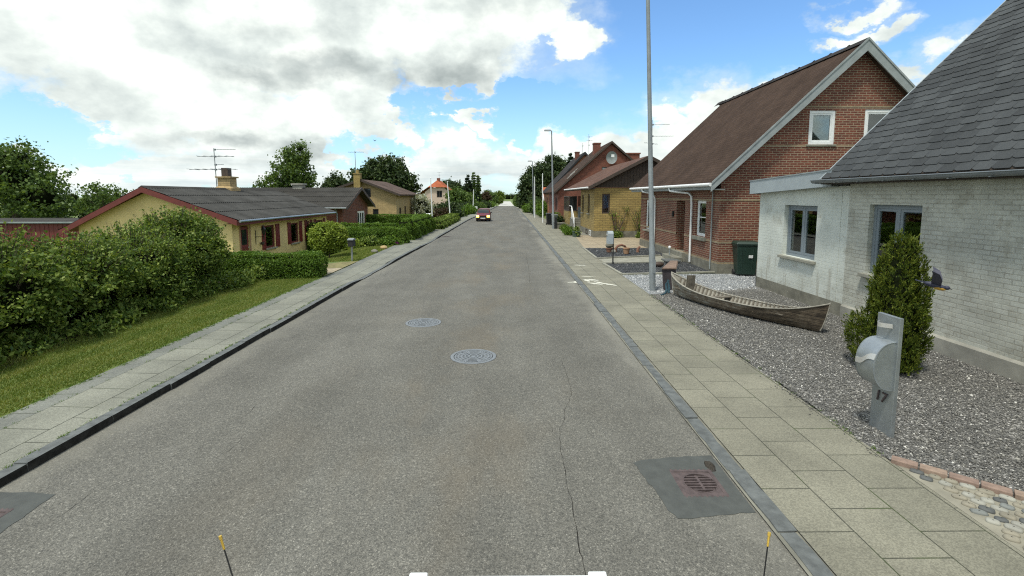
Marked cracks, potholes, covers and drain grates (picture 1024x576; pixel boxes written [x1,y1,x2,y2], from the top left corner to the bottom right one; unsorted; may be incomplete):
crack [552,360,586,575]
manhole cover [450,349,496,364]
drain grate [669,469,729,497]
manhole cover [405,318,441,327]
